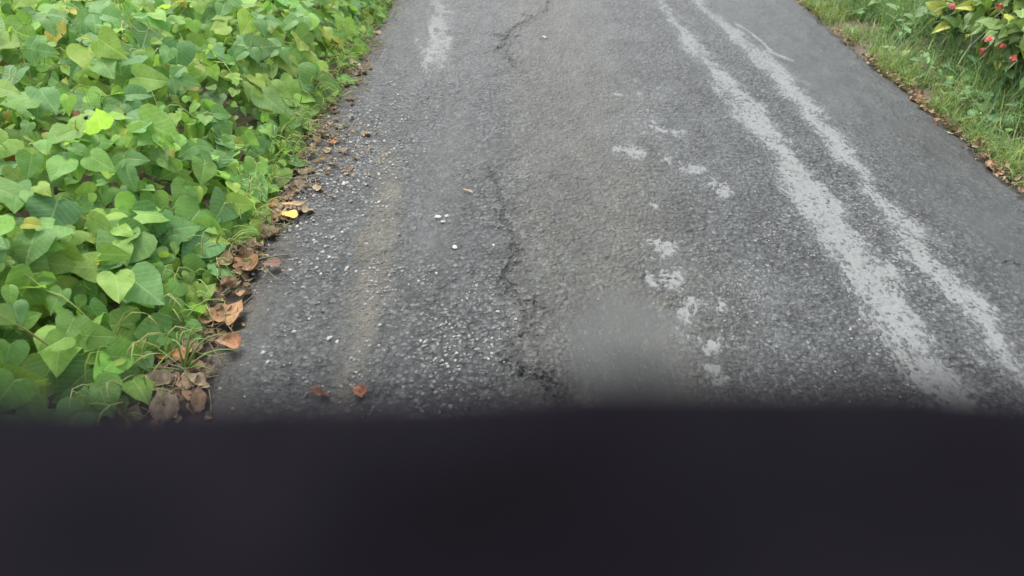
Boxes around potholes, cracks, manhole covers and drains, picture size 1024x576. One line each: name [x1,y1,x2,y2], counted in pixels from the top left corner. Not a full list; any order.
crack [493,0,550,68]
